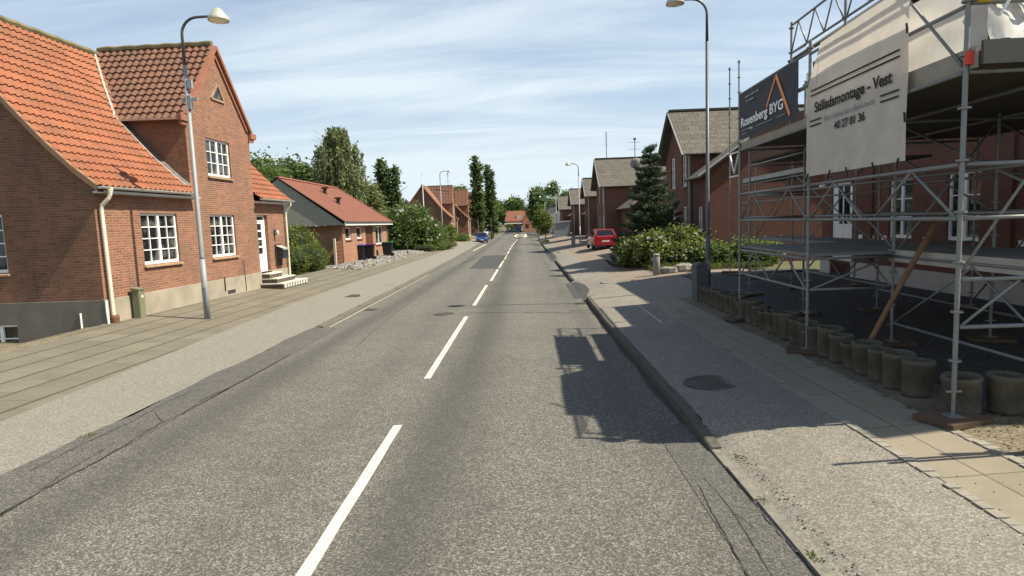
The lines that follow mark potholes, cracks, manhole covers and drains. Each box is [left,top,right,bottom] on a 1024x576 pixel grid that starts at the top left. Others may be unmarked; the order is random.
manhole cover [683,375,736,390]
crack [699,465,816,576]
